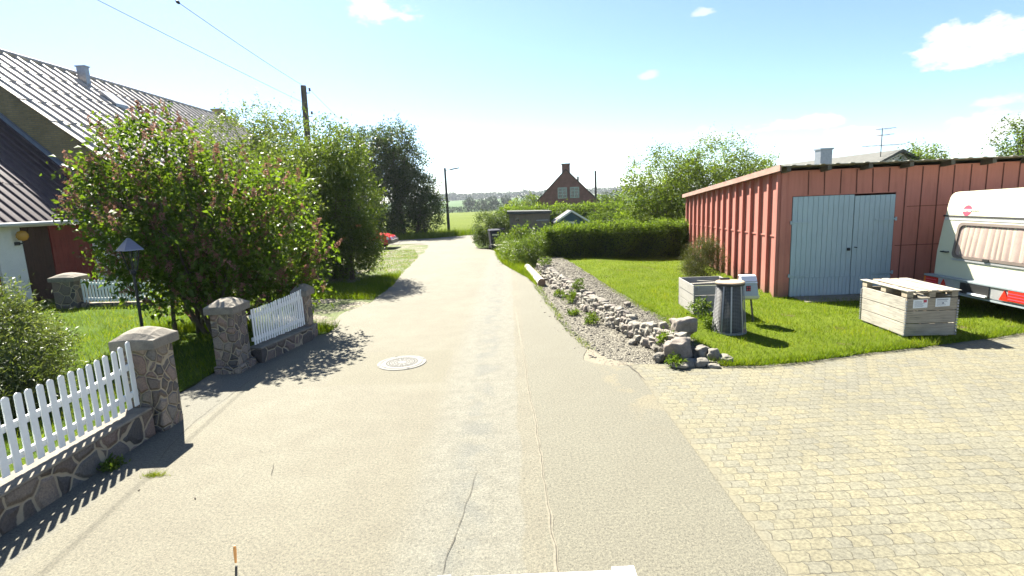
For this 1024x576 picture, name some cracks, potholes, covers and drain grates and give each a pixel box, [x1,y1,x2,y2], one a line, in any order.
manhole cover [377,355,426,371]
crack [442,466,481,575]
